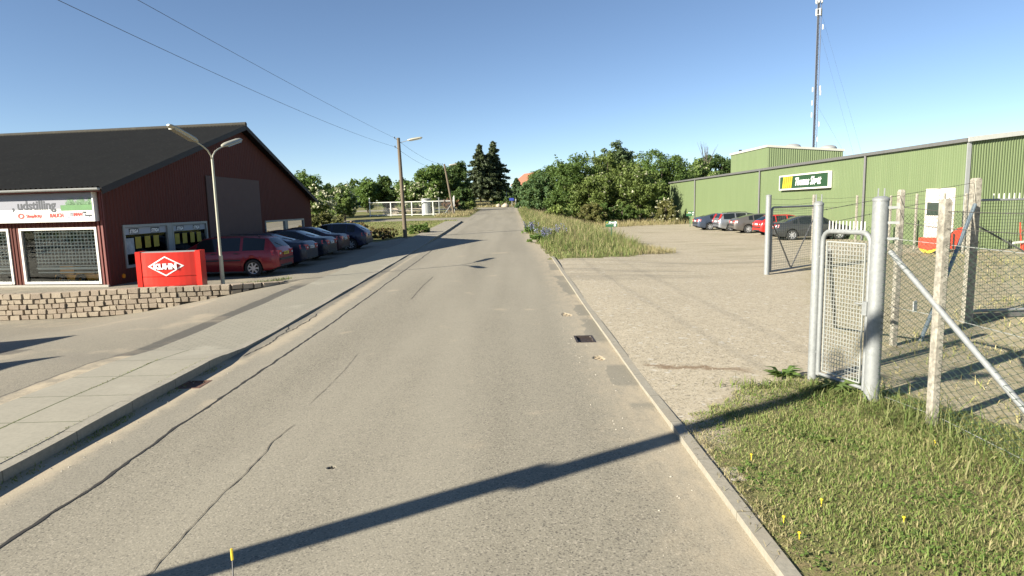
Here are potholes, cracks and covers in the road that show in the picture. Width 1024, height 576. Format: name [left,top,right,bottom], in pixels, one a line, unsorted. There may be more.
drain grate [574,335,596,343]
drain grate [175,380,212,389]
crack [147,424,295,576]
